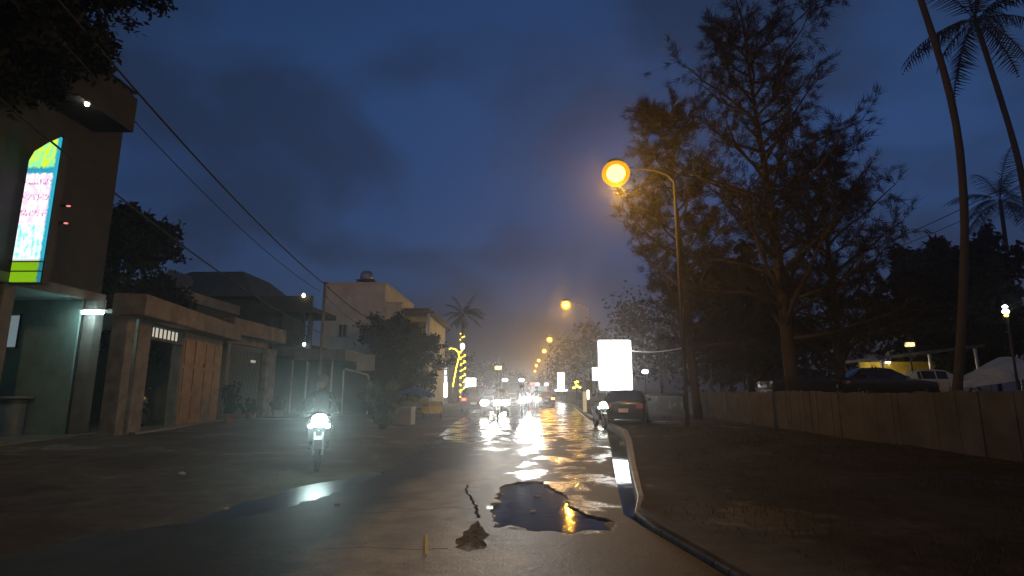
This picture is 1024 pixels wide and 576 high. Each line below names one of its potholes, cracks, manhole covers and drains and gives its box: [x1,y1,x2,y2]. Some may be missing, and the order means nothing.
pothole [455,520,489,552]
pothole [490,481,617,535]
